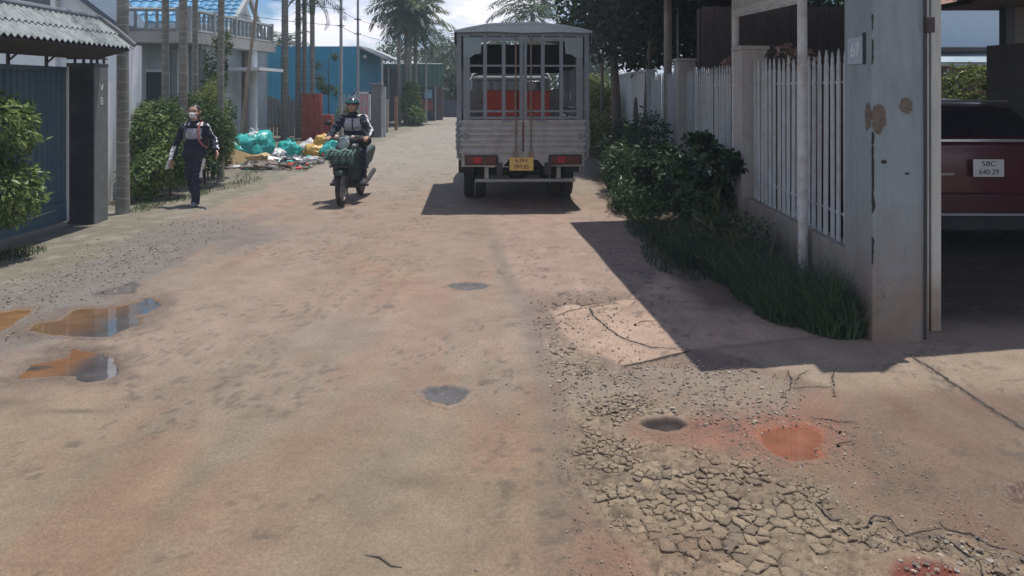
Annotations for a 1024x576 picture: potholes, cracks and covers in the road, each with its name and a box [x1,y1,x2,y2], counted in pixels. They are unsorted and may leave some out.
pothole [629,415,693,435]
crack [537,288,1024,576]
pothole [748,421,837,466]
pothole [16,295,170,340]
pothole [3,344,132,386]
pothole [0,307,38,334]
